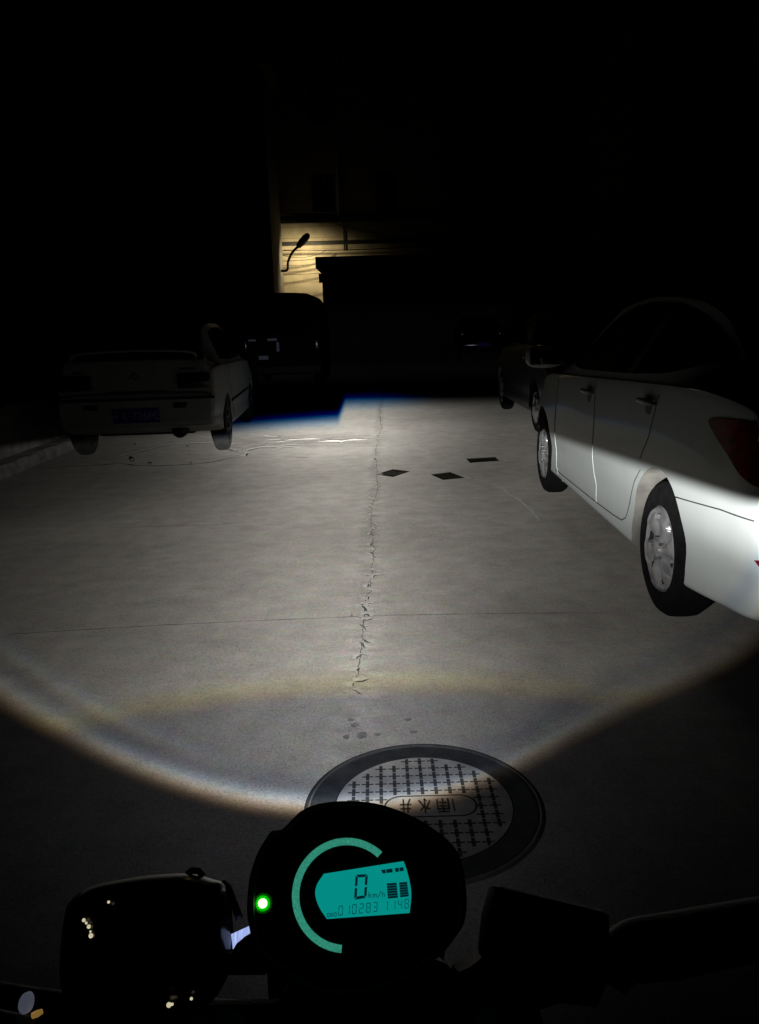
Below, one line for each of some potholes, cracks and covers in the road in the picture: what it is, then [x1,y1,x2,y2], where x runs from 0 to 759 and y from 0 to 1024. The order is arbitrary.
crack [52,434,385,468]
manhole cover [304,744,546,885]
